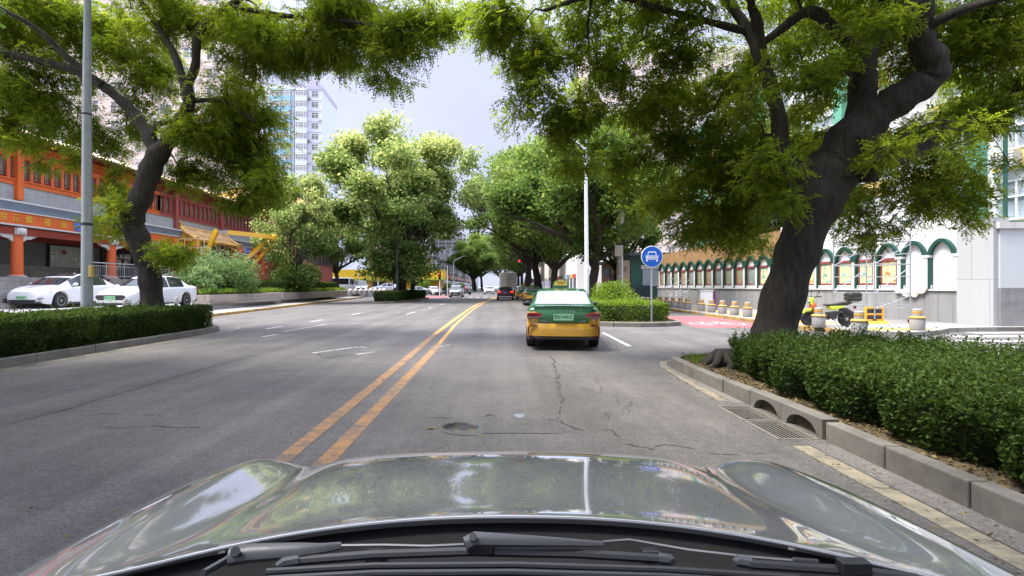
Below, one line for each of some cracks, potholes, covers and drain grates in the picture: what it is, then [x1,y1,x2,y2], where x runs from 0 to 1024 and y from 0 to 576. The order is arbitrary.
drain grate [743,420,819,440]
drain grate [716,405,778,421]
crack [18,413,199,428]
crack [418,355,735,455]
